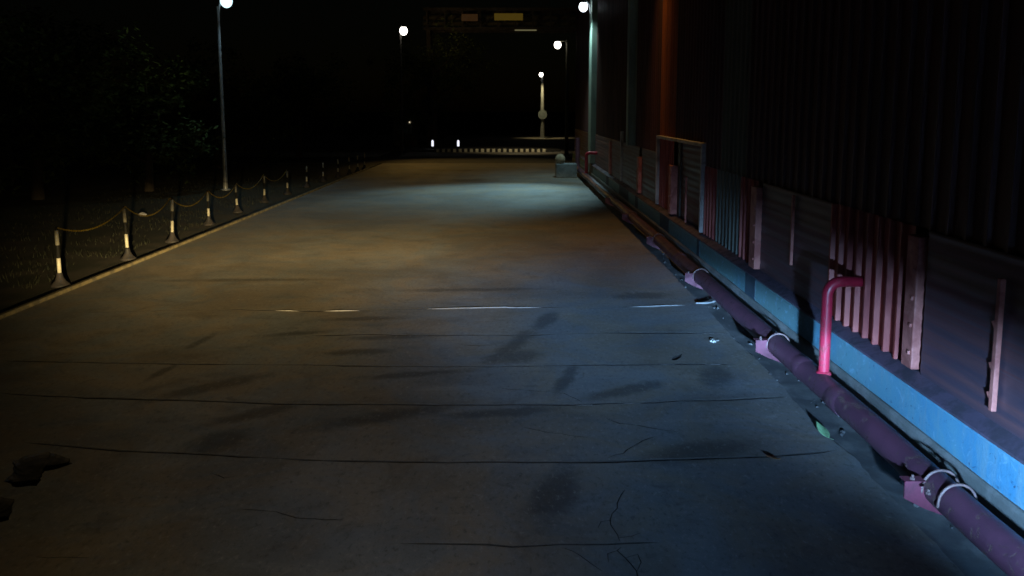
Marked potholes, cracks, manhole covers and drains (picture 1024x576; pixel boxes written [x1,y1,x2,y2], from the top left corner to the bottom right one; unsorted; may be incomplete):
crack [401,490,656,576]
pothole [0,497,14,522]
crack [4,388,836,478]
crack [243,509,339,520]
pothole [4,451,72,487]
